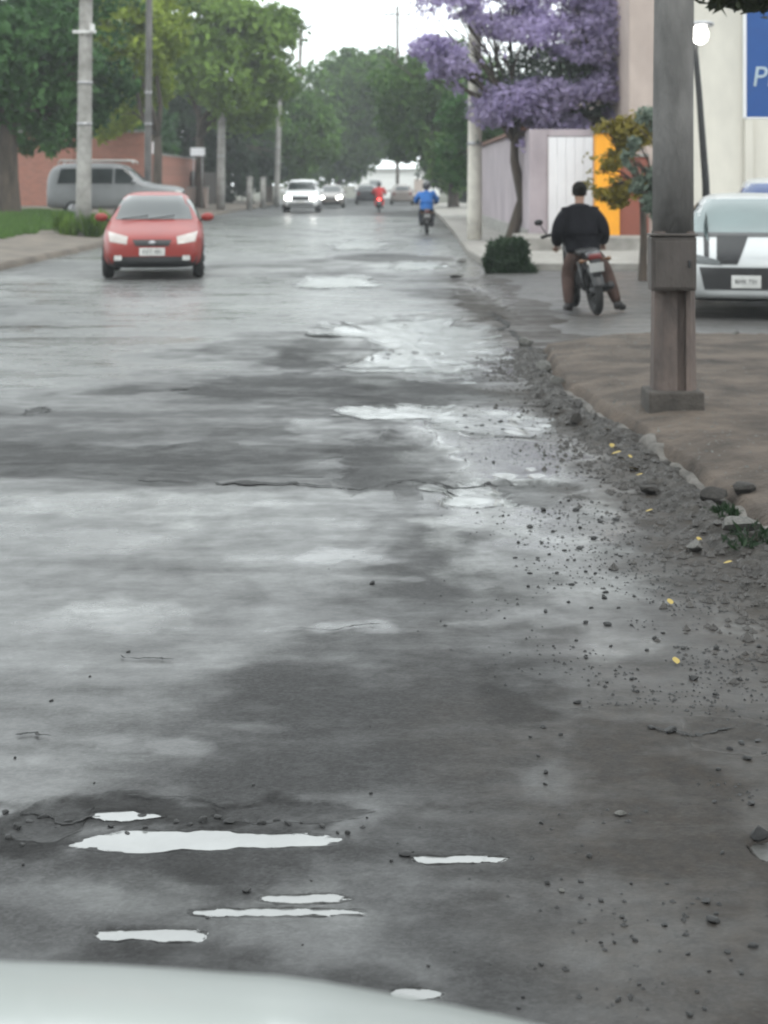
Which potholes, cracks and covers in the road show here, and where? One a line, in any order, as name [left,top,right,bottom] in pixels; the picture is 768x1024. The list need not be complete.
pothole [410,854,511,866]
crack [653,726,735,736]
pothole [65,828,342,854]
pothole [89,809,168,823]
pothole [327,403,457,420]
pothole [1,797,95,844]
pothole [285,274,384,289]
pothole [419,478,516,509]
crack [142,479,504,490]
